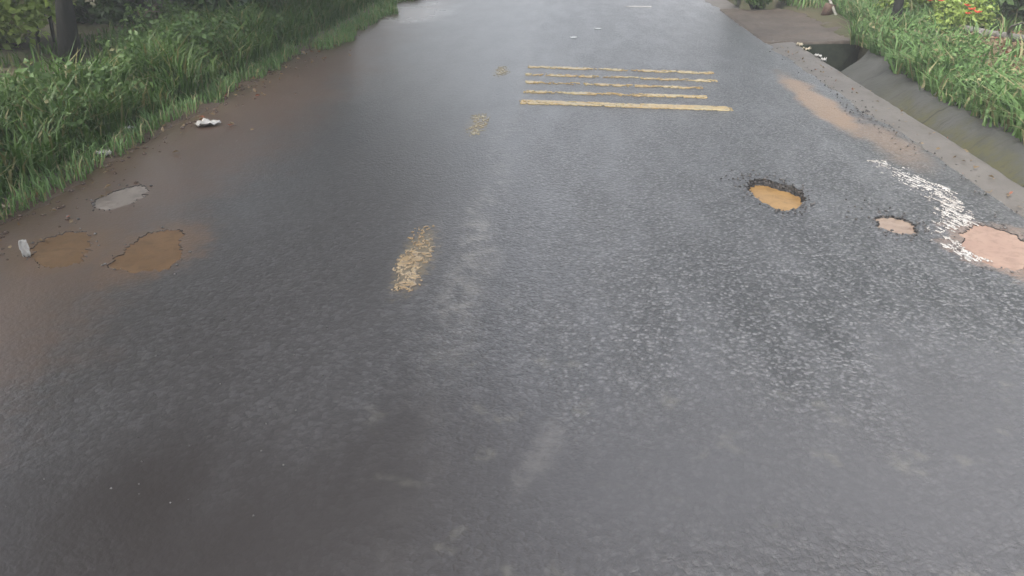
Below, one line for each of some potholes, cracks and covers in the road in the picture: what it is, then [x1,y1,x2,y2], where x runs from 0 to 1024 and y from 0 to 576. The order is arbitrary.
pothole [23,215,98,269]
pothole [720,169,821,217]
pothole [101,226,192,275]
